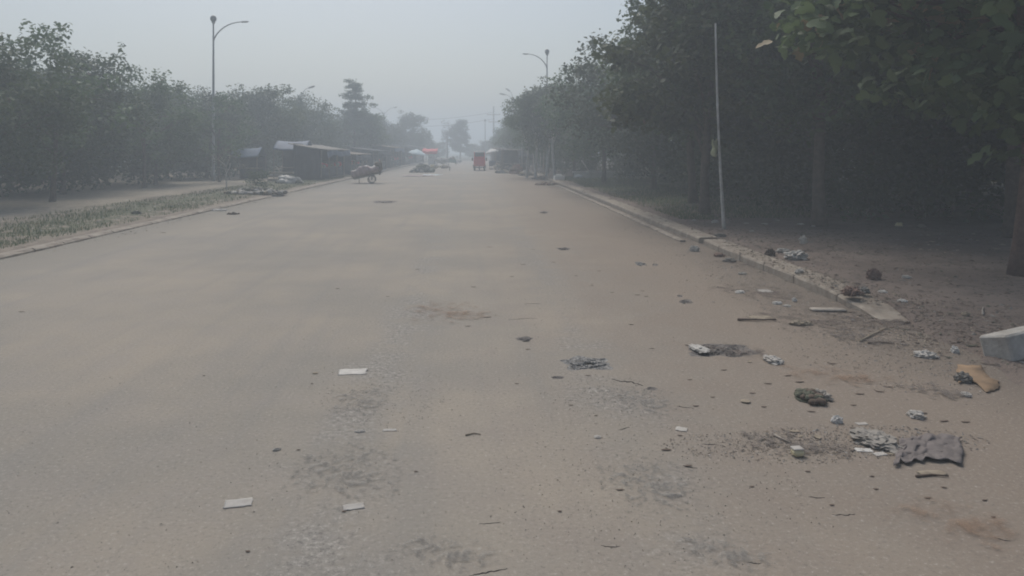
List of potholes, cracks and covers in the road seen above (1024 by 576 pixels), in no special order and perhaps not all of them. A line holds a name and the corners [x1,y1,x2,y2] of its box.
pothole [688,344,760,357]
pothole [559,356,613,370]
